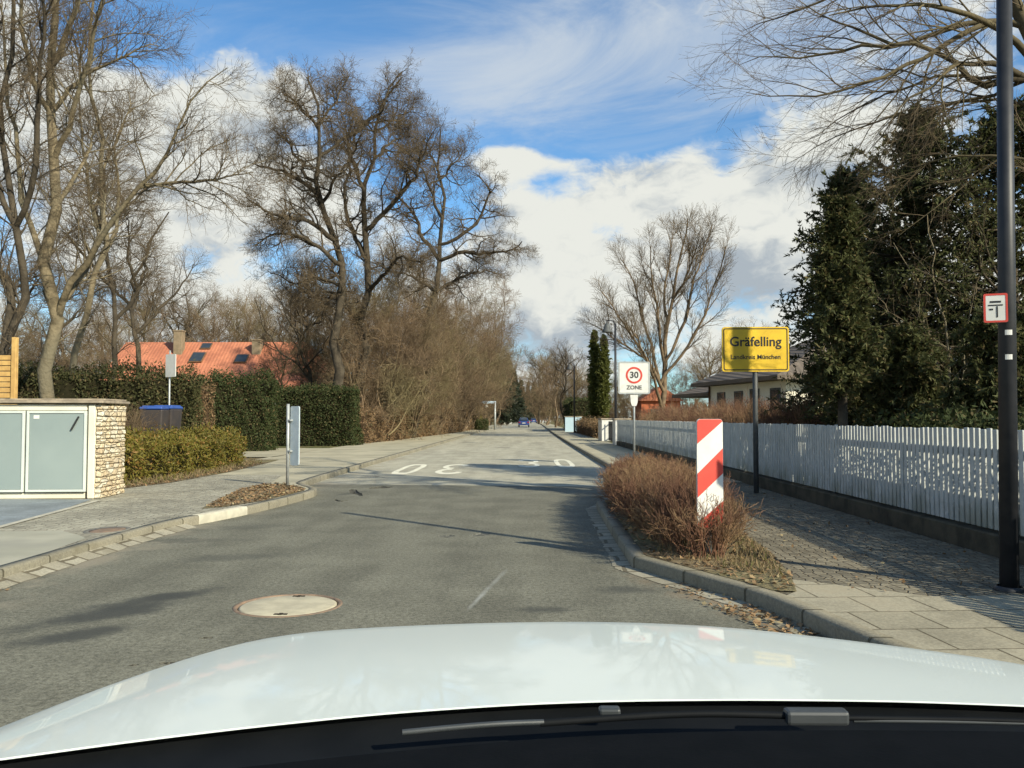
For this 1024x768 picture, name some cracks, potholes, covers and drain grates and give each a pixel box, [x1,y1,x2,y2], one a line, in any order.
utility cover [83,526,131,534]
manhole cover [232,594,343,618]
